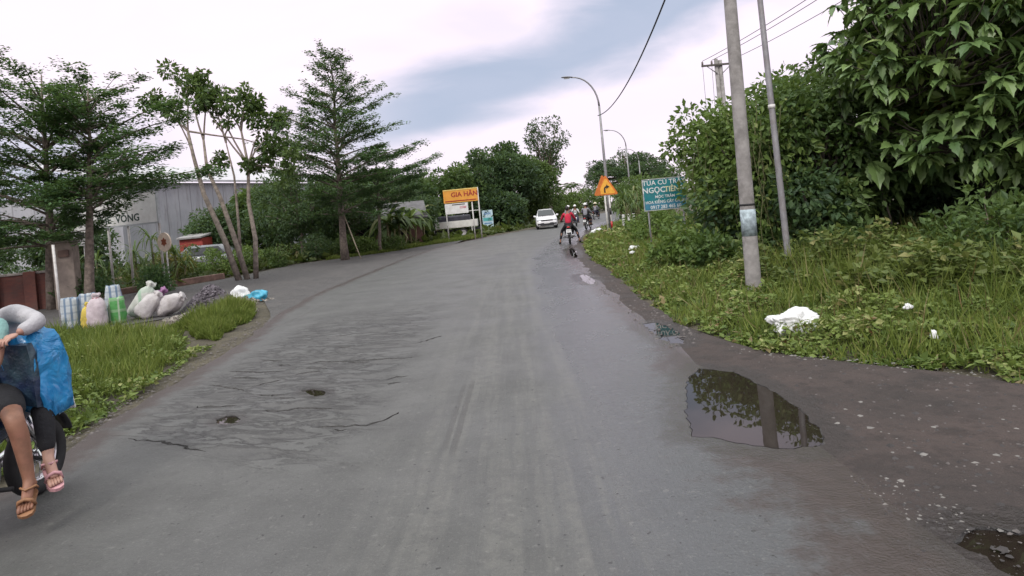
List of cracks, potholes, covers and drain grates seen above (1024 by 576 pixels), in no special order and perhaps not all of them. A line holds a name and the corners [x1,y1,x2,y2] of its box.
crack [128,438,206,452]
crack [196,334,441,431]
pothole [216,416,240,424]
pothole [953,526,1024,576]
